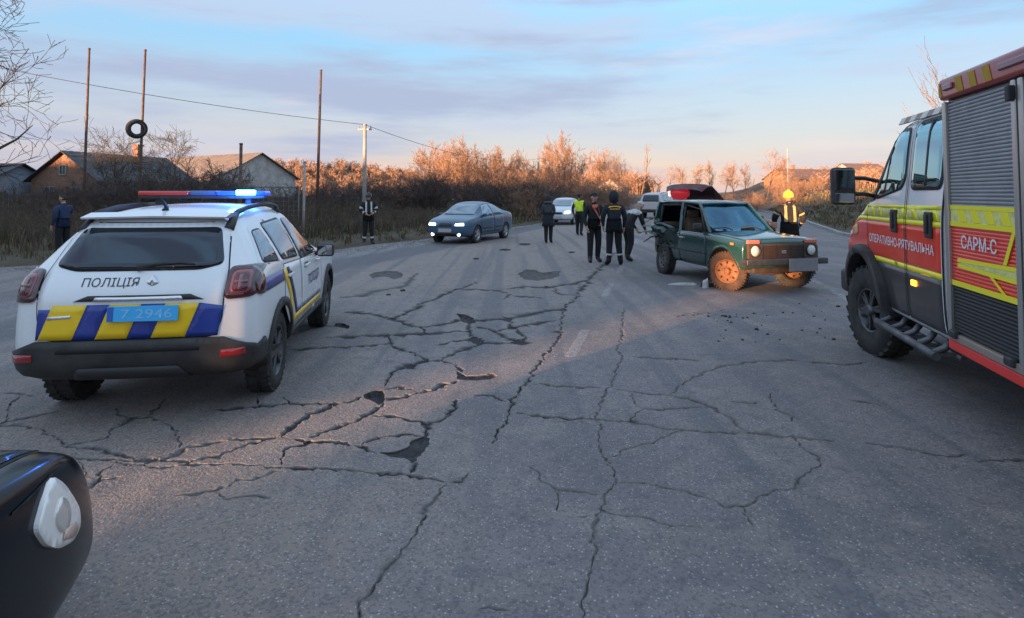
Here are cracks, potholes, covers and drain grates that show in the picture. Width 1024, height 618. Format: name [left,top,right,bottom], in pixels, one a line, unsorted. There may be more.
pothole [369,271,403,279]
pothole [380,436,430,463]
pothole [457,314,476,324]
crack [0,273,1024,618]
pothole [518,269,560,281]
pothole [363,390,385,405]
